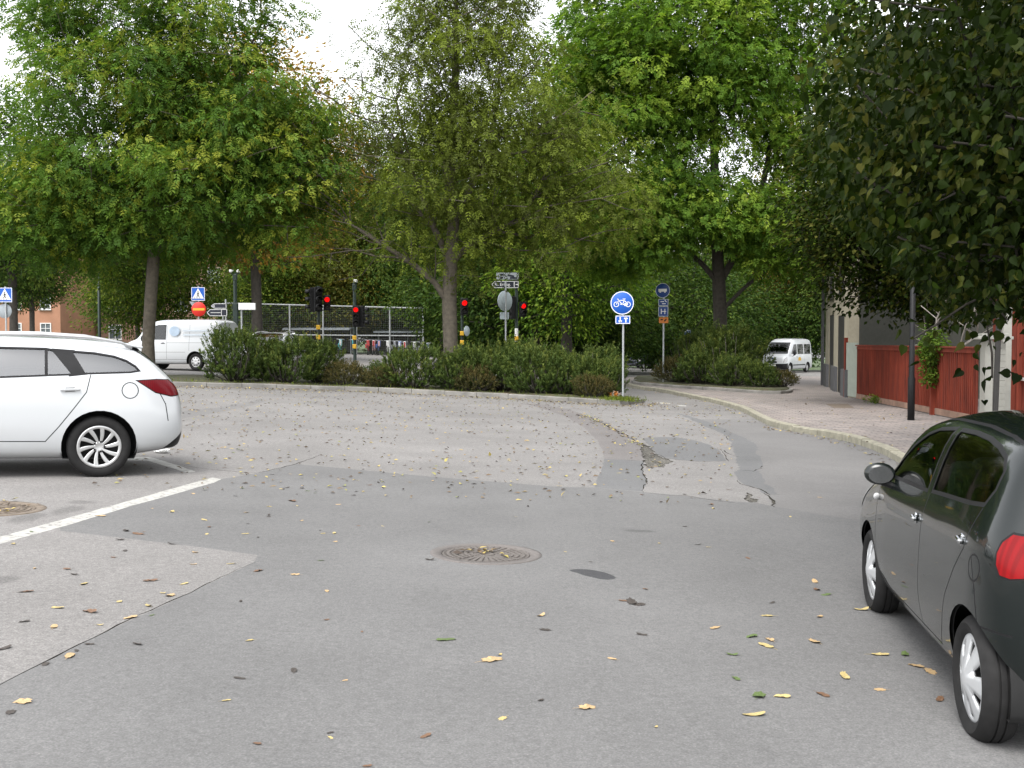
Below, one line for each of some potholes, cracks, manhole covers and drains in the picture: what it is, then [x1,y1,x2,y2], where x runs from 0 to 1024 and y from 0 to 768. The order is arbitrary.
crack [589,417,783,507]
manhole cover [430,543,542,565]
manhole cover [0,501,47,516]
pothole [640,445,673,469]
